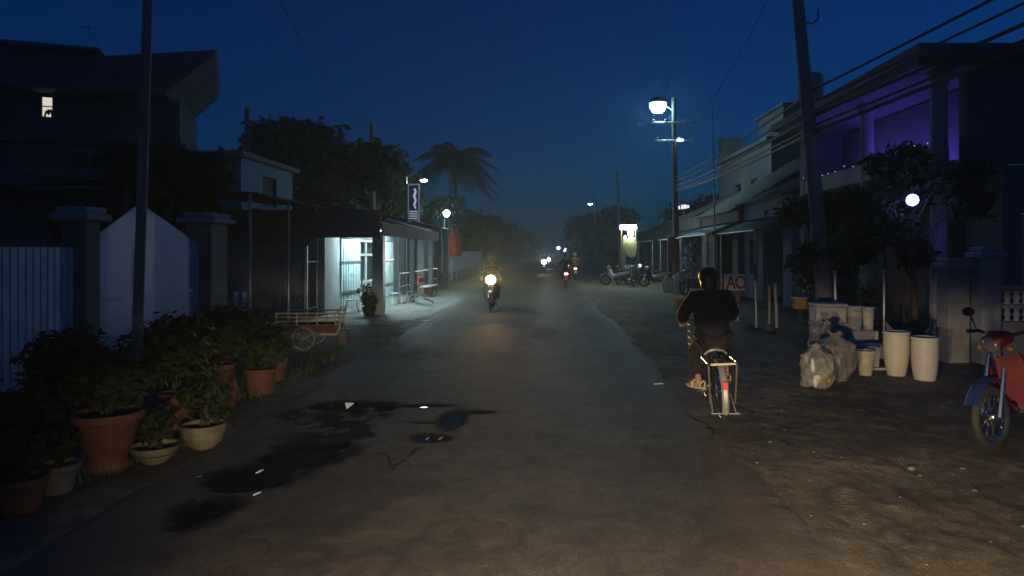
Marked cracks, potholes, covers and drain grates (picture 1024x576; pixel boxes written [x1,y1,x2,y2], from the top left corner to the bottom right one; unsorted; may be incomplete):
crack [319,421,426,471]
pothole [375,403,502,443]
pothole [307,401,399,414]
